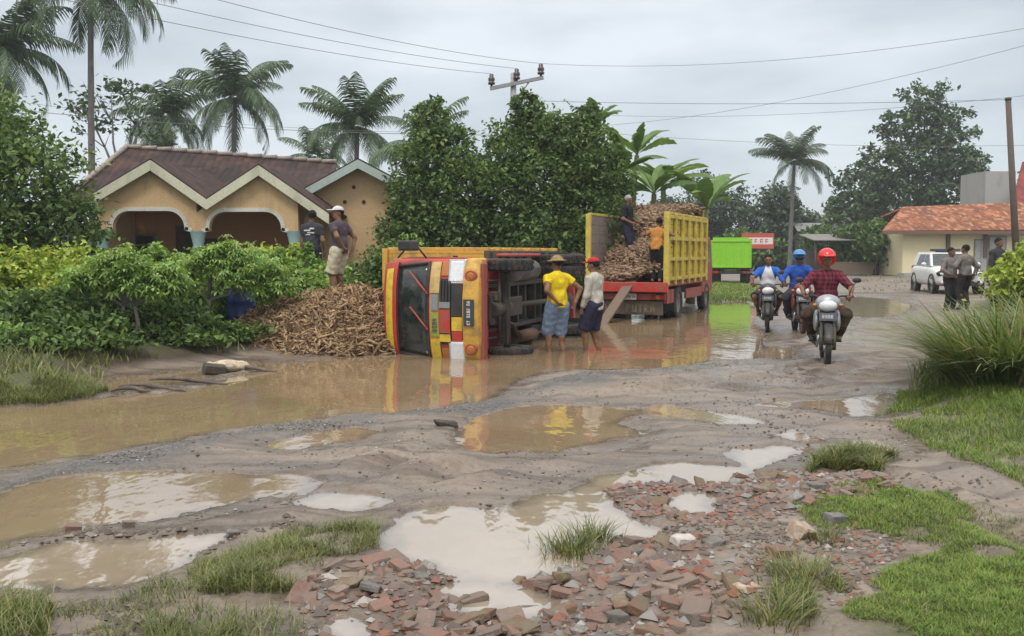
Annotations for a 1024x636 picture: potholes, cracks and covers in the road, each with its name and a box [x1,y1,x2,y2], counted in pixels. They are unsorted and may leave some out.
pothole [0,300,773,469]
pothole [744,390,901,418]
pothole [0,463,335,550]
pothole [283,485,401,513]
pothole [0,524,241,593]
pothole [370,458,766,584]
pothole [714,441,819,470]
